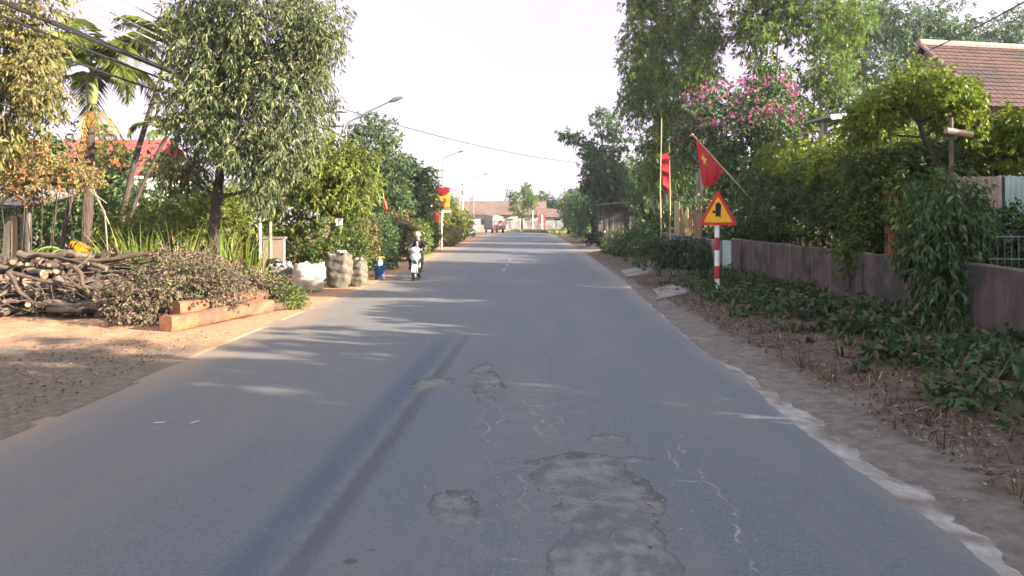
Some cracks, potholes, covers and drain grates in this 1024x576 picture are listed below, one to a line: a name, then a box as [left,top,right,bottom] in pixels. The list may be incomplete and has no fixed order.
pothole [461,361,507,403]
crack [659,433,763,576]
pothole [426,488,480,524]
crack [481,353,565,479]
crack [517,472,530,519]
pothole [586,434,630,444]
pothole [524,450,686,576]
pothole [410,377,454,393]
